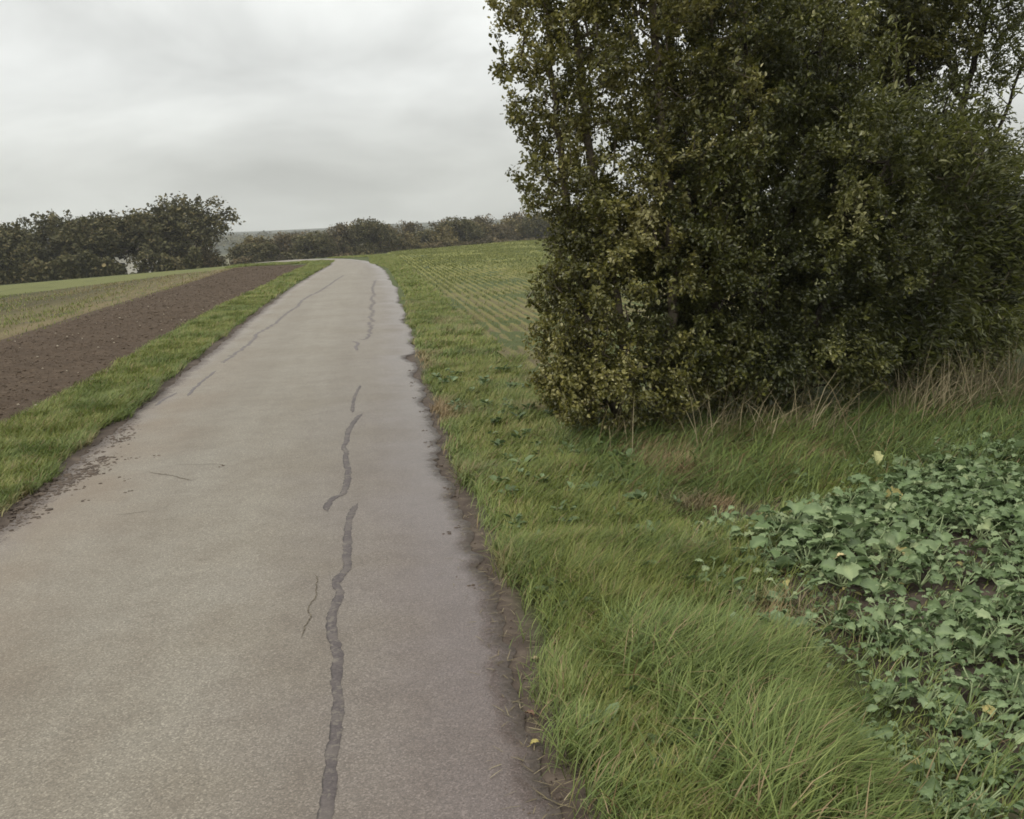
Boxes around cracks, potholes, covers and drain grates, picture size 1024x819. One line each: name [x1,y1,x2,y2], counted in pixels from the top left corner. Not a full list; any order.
crack [301,574,318,637]
